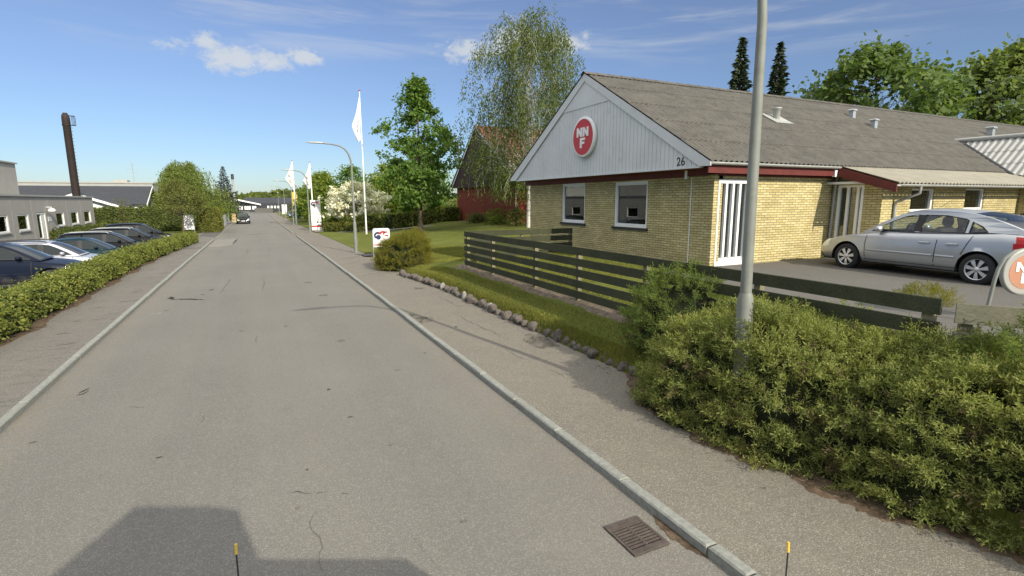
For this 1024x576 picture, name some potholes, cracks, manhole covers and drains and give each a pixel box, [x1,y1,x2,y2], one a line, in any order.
drain grate [603,516,670,557]
crack [309,515,323,570]
